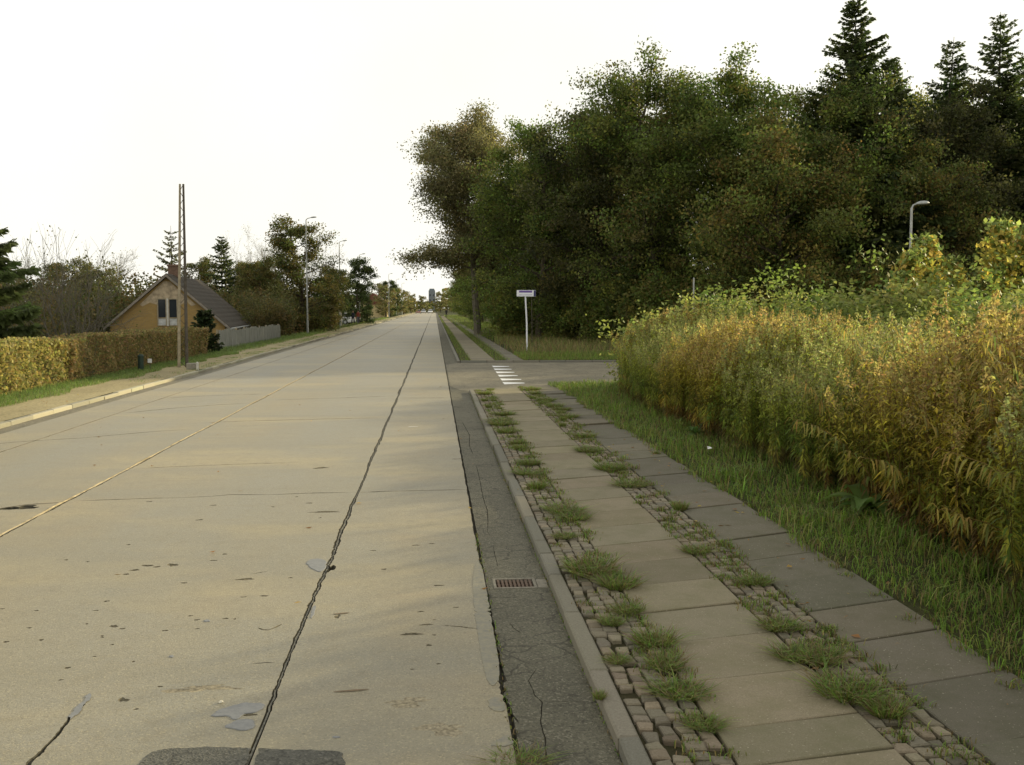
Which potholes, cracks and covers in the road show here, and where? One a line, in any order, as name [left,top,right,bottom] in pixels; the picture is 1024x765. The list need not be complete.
crack [437,323,584,760]
crack [26,704,85,765]
